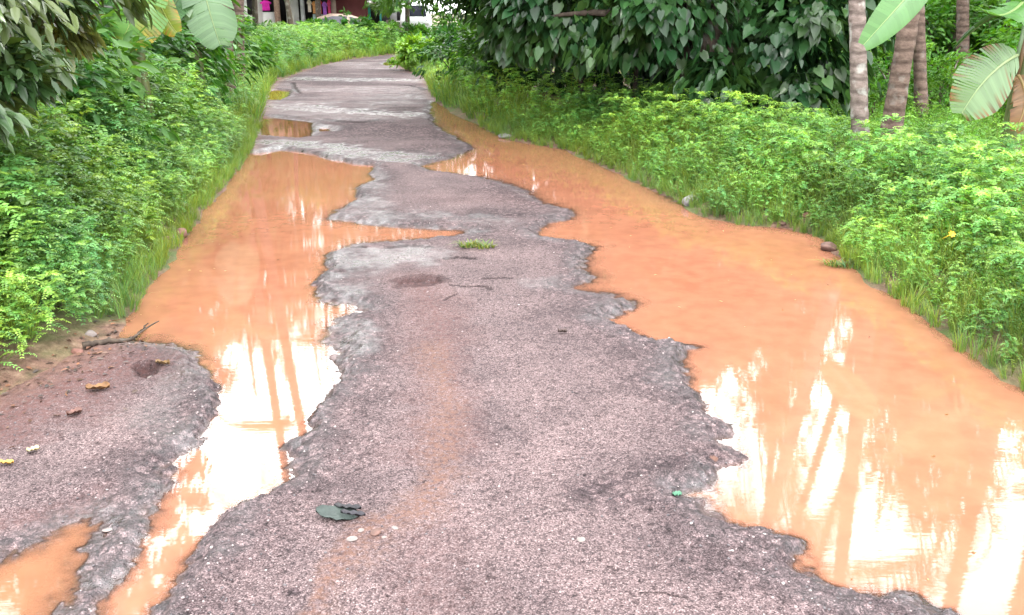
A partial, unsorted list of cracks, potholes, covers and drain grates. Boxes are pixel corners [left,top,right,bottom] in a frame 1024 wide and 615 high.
pothole [267,88,293,100]
pothole [0,504,128,615]
pothole [256,114,320,138]
pothole [415,100,1024,615]
pothole [75,145,482,615]
